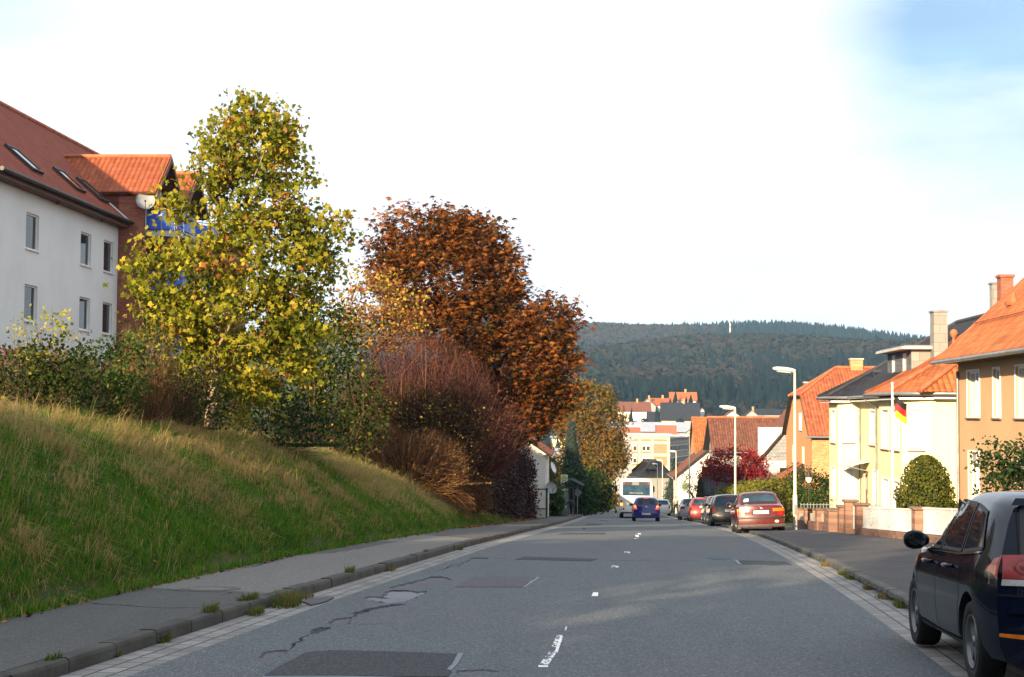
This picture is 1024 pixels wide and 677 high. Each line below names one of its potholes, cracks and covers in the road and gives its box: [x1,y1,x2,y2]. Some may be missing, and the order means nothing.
pothole [364,590,429,603]
